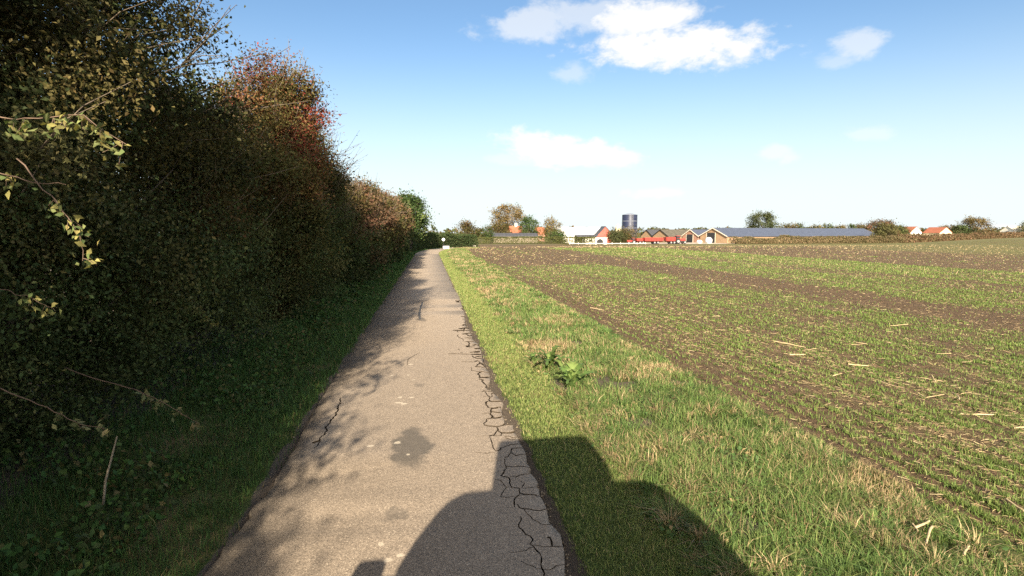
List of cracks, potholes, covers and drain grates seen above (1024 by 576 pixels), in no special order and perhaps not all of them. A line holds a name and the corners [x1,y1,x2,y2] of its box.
crack [451,300,565,576]
crack [312,398,341,448]
